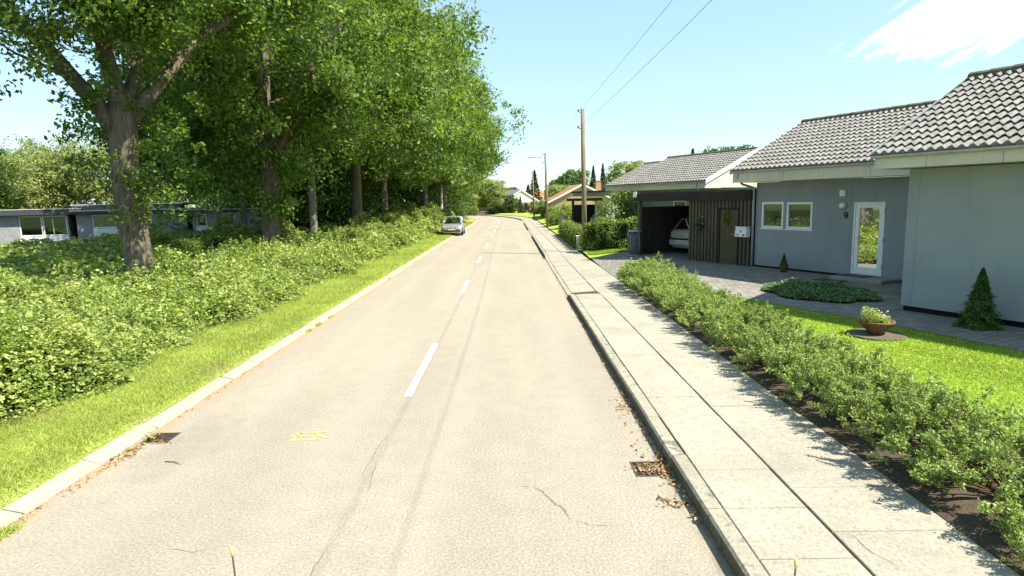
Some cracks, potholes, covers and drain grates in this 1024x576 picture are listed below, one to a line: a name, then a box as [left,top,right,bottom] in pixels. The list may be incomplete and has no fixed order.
crack [361,434,388,490]
crack [525,486,608,526]
drain grate [629,461,672,477]
drain grate [140,432,182,443]
